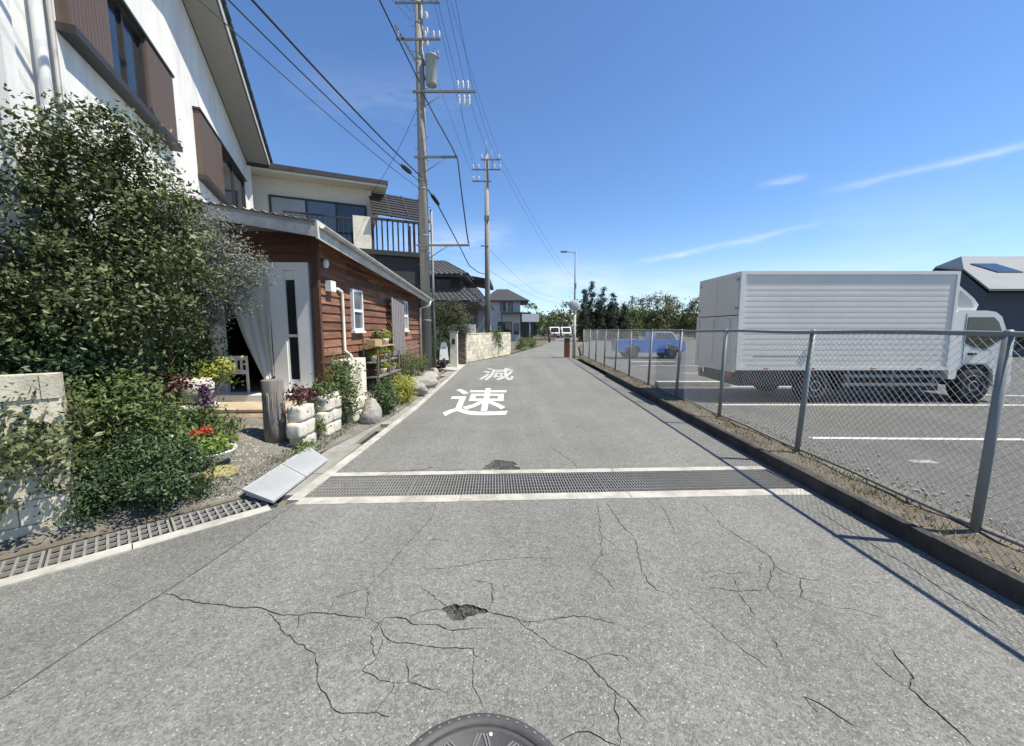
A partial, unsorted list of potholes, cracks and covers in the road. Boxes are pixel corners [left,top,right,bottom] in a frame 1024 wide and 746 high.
crack [819,511,1006,631]
drain grate [304,476,417,498]
crack [0,505,648,746]
crack [590,504,674,598]
drain grate [507,473,607,494]
drain grate [408,474,508,496]
drain grate [44,518,172,567]
drain grate [0,550,46,579]
crack [872,646,973,746]
crack [686,505,881,669]
pothole [441,604,489,621]
drain grate [170,497,269,531]
